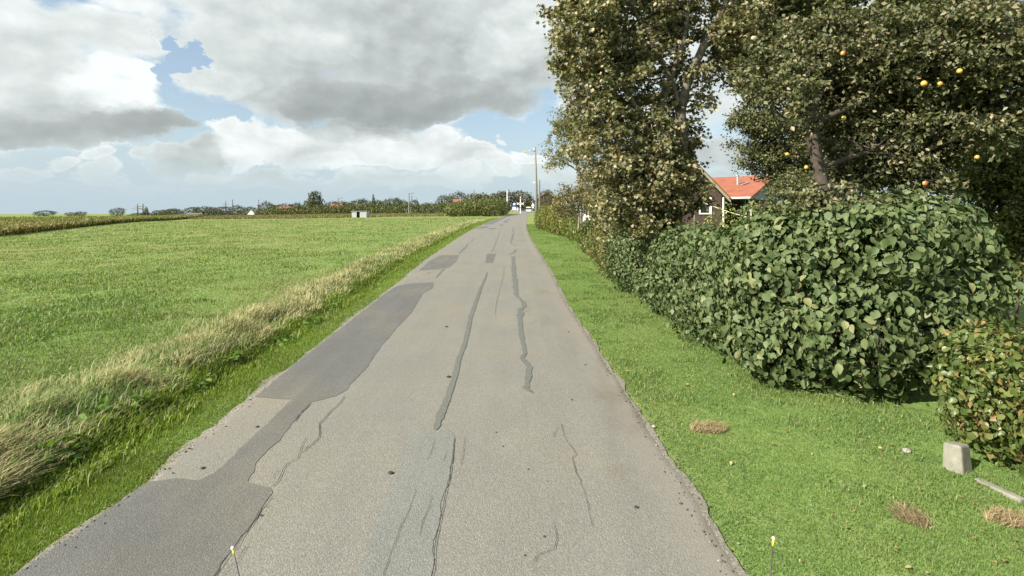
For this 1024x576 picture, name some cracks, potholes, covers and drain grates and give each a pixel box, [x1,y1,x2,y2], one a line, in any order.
crack [214,397,344,576]
crack [383,437,465,576]
